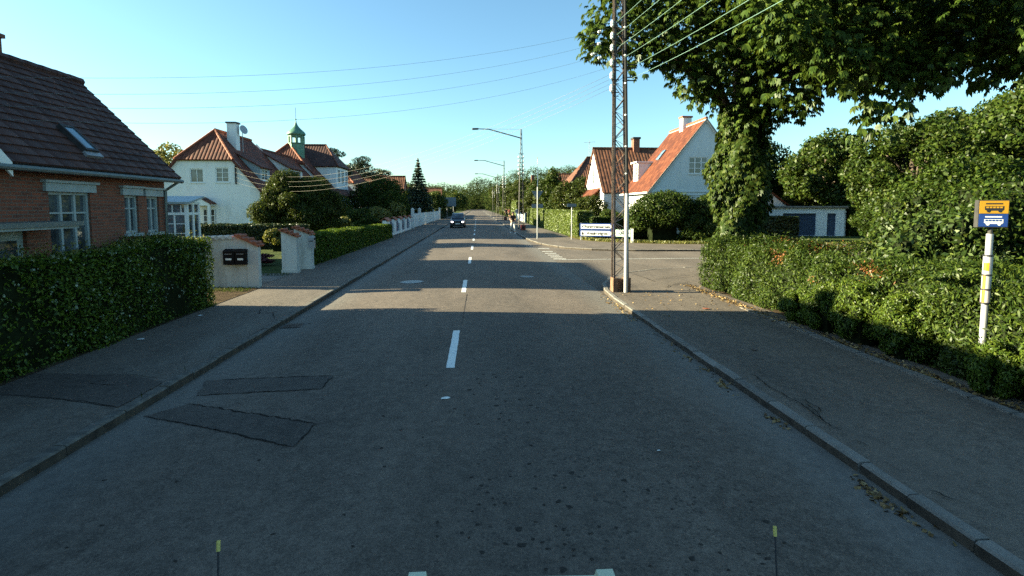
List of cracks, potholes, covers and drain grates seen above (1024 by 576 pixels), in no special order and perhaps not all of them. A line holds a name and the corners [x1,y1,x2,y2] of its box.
crack [755,375,865,444]
